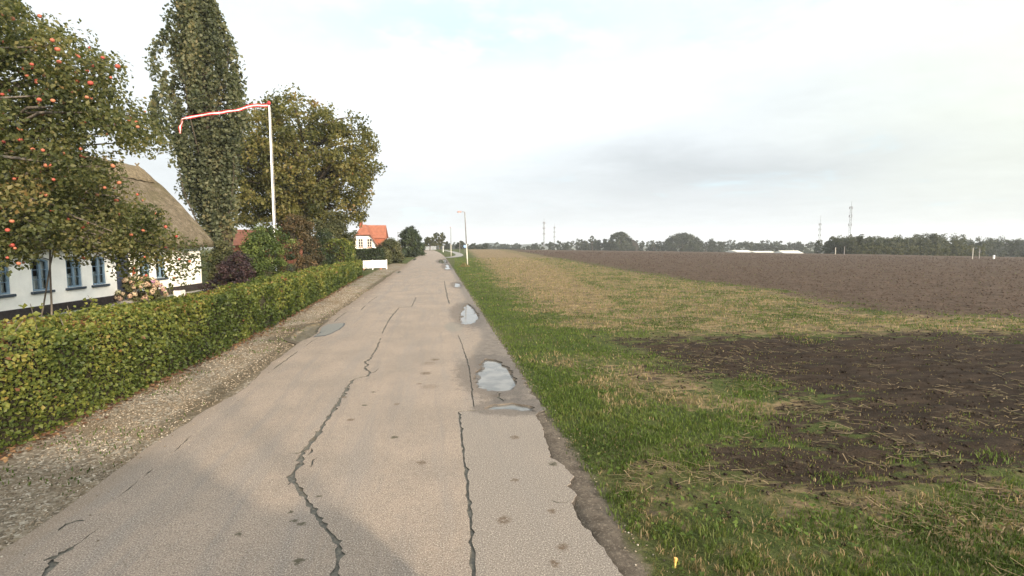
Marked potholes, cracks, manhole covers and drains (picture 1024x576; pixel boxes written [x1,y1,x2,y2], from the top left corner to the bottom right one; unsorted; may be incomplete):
pothole [458,304,480,325]
crack [42,520,102,576]
crack [274,297,416,576]
pothole [473,359,517,391]
pothole [290,323,323,342]
pothole [485,403,535,411]
